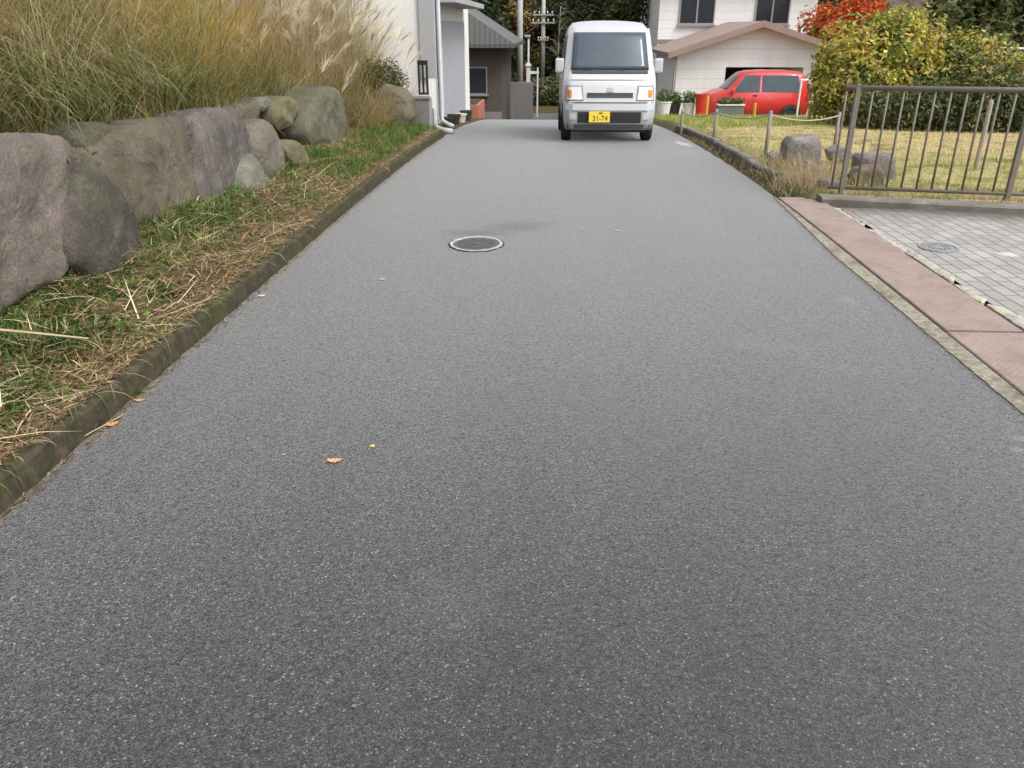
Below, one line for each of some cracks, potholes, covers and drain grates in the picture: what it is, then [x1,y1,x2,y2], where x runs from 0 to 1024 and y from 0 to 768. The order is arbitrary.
manhole cover [917,242,960,253]
manhole cover [448,236,505,252]
